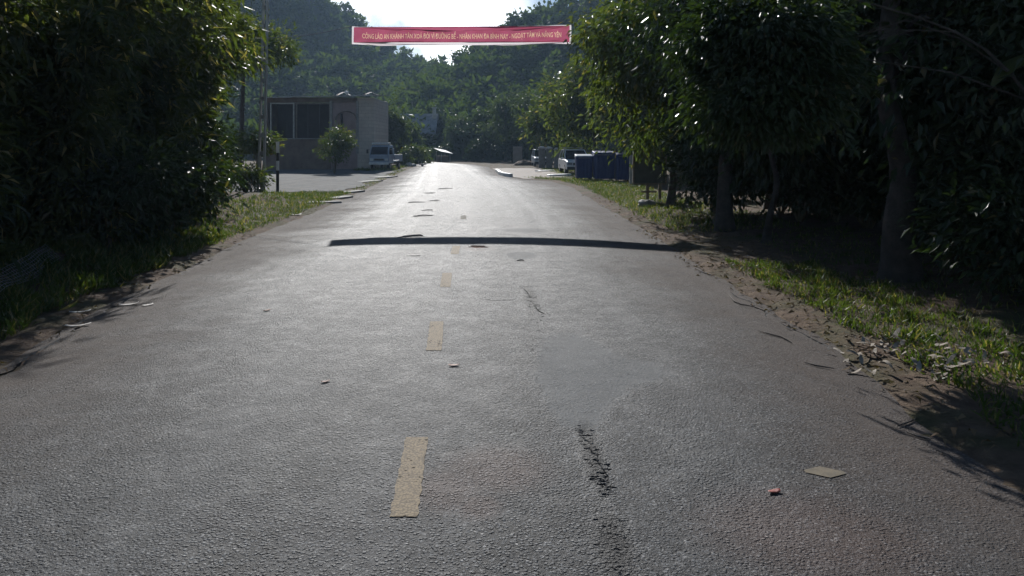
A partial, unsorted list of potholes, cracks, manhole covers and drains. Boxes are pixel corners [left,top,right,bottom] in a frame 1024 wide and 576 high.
crack [575,425,626,499]
crack [582,518,631,574]
crack [519,286,548,349]
crack [730,292,830,350]
